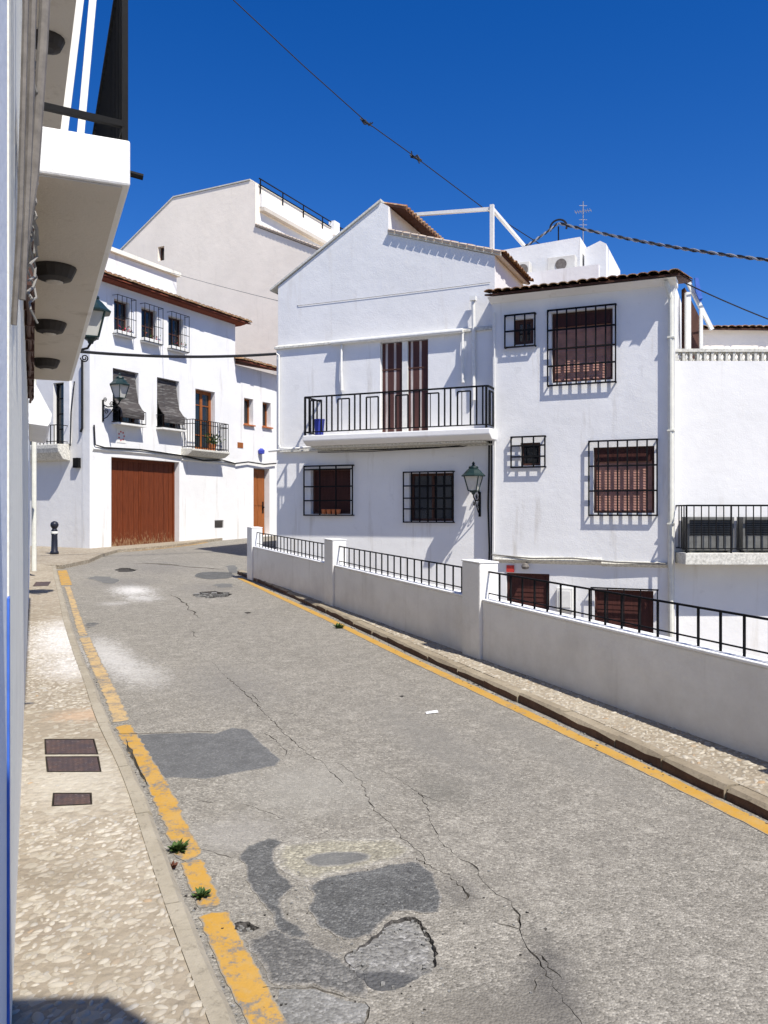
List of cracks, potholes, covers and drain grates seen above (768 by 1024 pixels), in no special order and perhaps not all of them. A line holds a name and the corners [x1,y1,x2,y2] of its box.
pothole [344,917,438,991]
manhole cover [44,739,98,755]
crack [214,663,582,1024]
manhole cover [45,756,101,772]
manhole cover [52,793,92,806]
